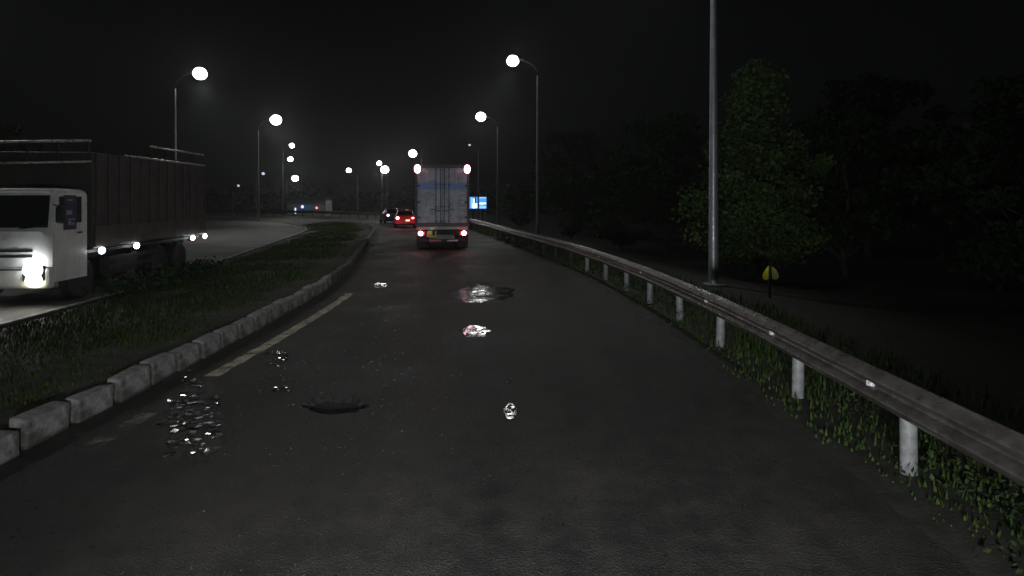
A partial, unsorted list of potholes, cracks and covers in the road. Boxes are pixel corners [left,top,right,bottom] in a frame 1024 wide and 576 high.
pothole [503,402,517,419]
pothole [261,350,290,366]
pothole [152,366,233,464]
pothole [447,283,516,303]
pothole [270,385,293,394]
pothole [300,396,370,415]
pothole [459,324,492,337]
